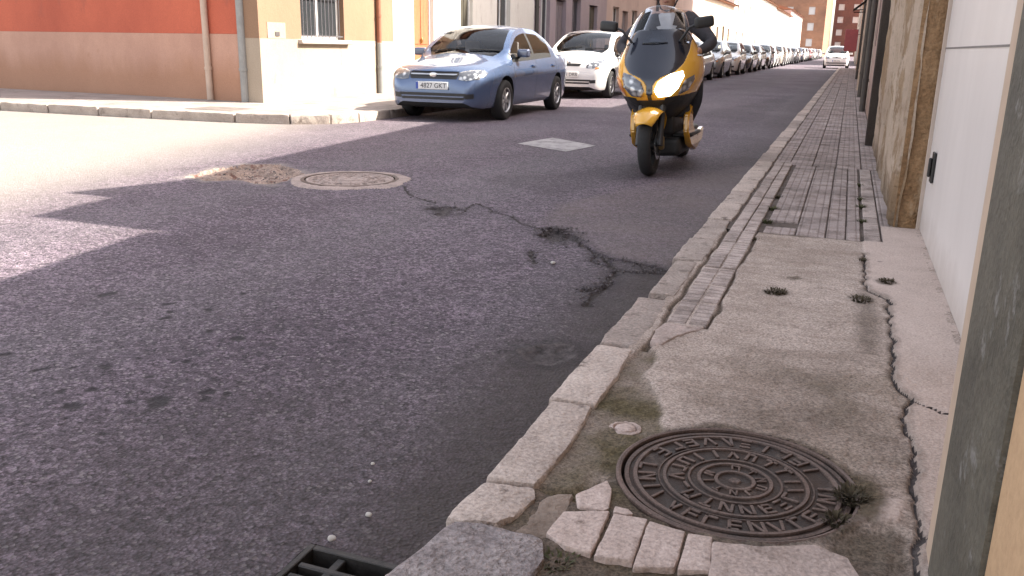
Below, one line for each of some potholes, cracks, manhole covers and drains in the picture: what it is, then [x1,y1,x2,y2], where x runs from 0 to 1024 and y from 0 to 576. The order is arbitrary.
crack [862,255,949,576]
manhole cover [290,171,411,190]
crack [398,186,442,204]
manhole cover [616,428,861,545]
drain grate [276,544,398,576]
crack [570,238,670,307]
crack [461,203,546,230]
